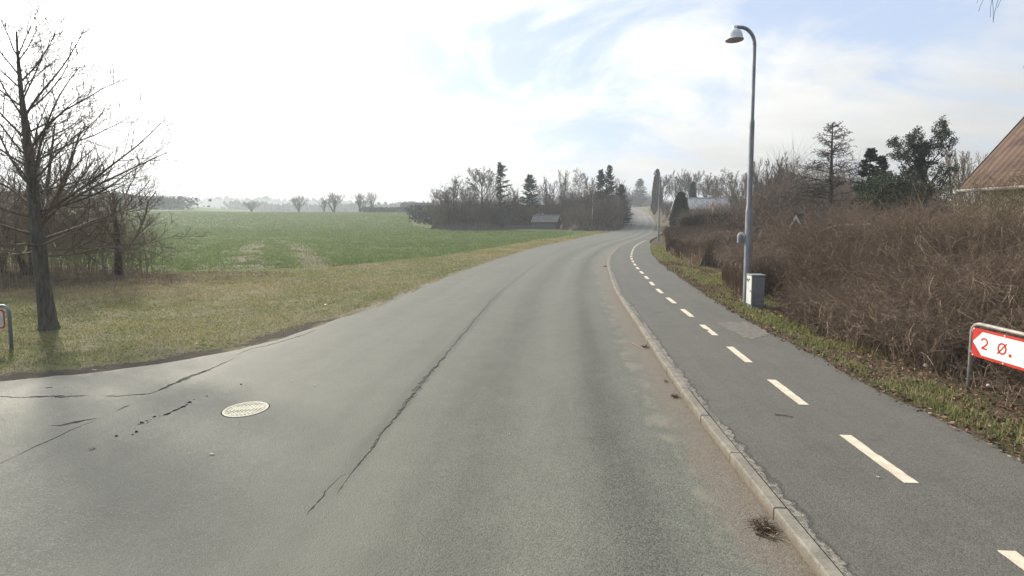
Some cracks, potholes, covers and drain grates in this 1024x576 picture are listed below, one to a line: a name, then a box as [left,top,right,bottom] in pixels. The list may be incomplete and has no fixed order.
crack [307,288,504,515]
crack [0,331,312,398]
manhole cover [221,401,270,418]
